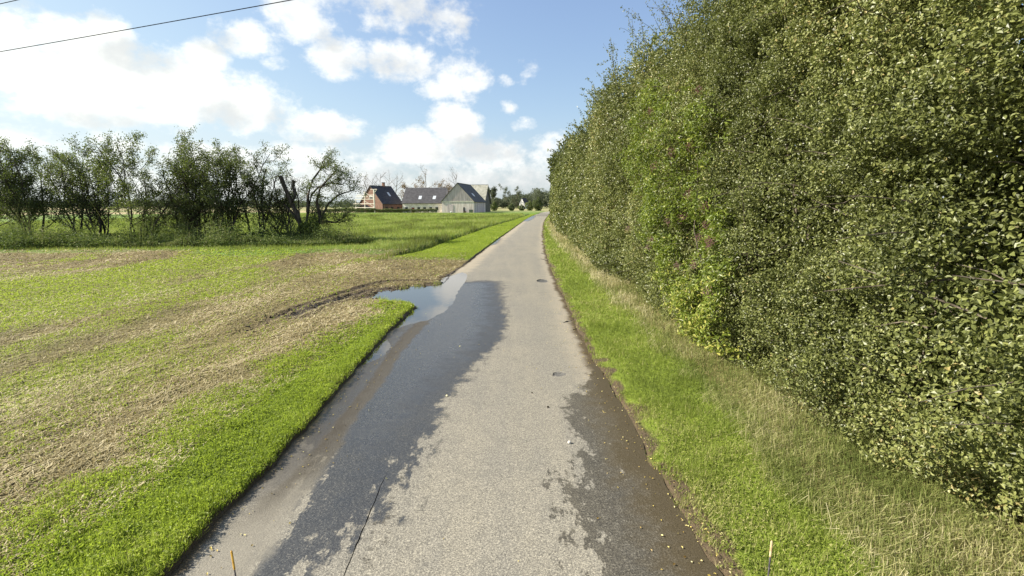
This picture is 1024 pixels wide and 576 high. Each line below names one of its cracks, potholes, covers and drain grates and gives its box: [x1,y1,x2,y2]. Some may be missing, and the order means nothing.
crack [343,478,385,576]
